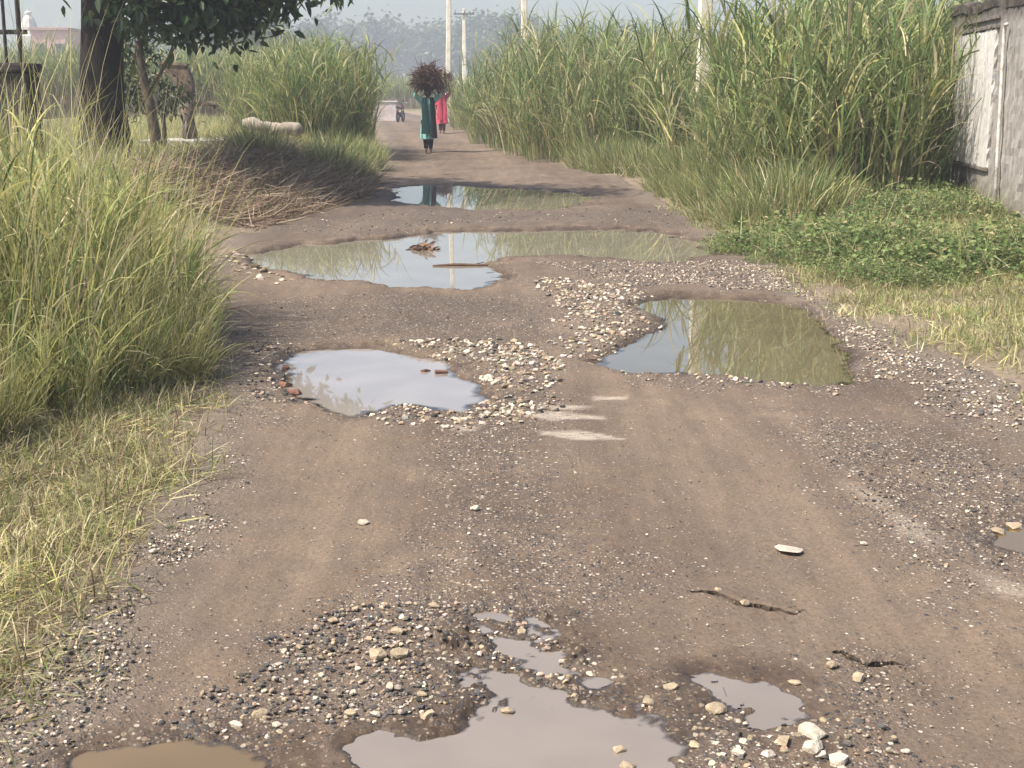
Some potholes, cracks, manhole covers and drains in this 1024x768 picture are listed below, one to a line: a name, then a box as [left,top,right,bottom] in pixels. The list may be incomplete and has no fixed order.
crack [651,581,841,624]
pothole [16,712,335,768]
pothole [379,183,603,211]
pothole [214,225,726,291]
pothole [322,586,784,768]
crack [789,642,947,684]
pothole [577,290,880,388]
pothole [654,645,885,765]
pothole [257,339,515,421]
